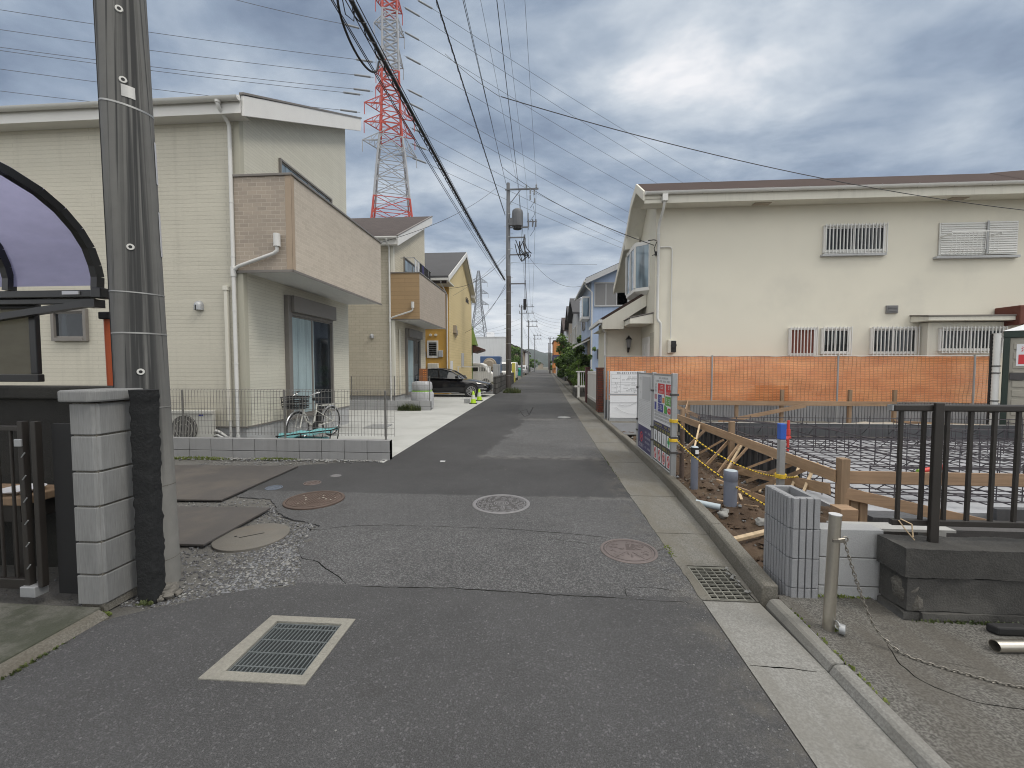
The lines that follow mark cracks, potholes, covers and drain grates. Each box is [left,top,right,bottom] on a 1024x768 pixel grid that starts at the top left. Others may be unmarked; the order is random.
manhole cover [282,490,345,510]
crack [290,525,607,544]
manhole cover [600,538,658,564]
drain grate [198,615,355,686]
manhole cover [211,523,290,553]
crack [365,586,690,604]
drain grate [687,566,756,613]
manhole cover [472,494,530,514]
